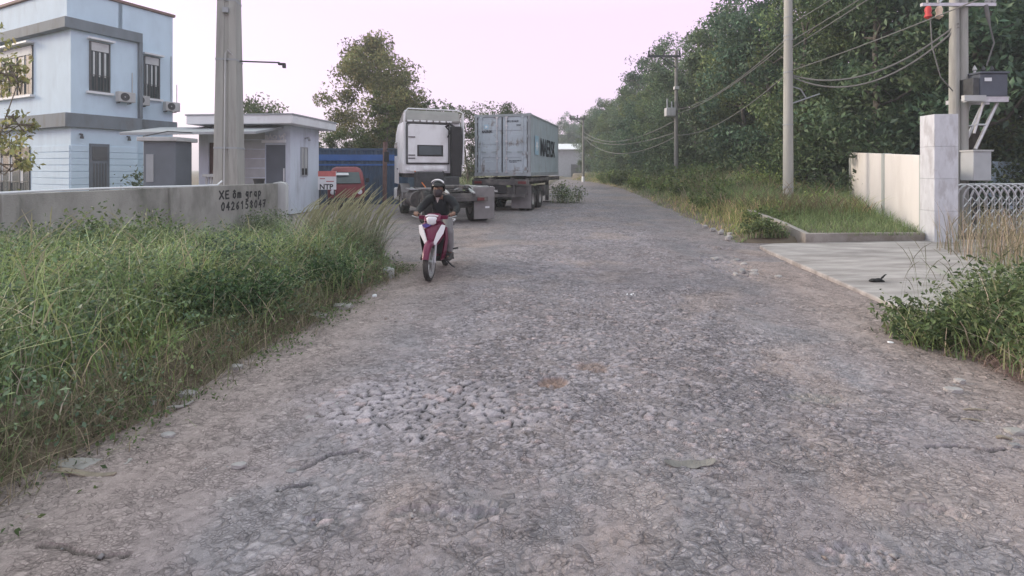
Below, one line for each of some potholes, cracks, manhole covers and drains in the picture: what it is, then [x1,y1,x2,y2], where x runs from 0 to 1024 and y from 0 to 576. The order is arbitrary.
pothole [229,371,581,446]
crack [277,448,363,492]
crack [923,443,1011,453]
pothole [572,362,612,373]
crack [37,540,135,561]
